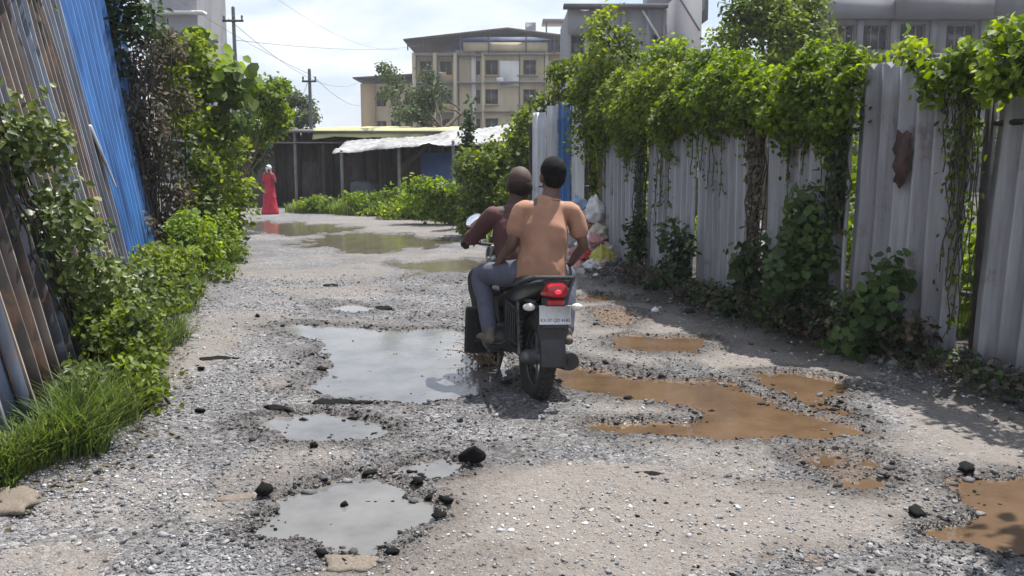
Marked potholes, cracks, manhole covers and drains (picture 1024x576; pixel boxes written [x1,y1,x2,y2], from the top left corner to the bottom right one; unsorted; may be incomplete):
pothole [386,452,470,482]
pothole [223,405,415,447]
pothole [319,301,381,314]
pothole [231,460,456,567]
pothole [768,438,918,497]
pothole [273,231,463,255]
pothole [601,330,718,355]
pothole [261,319,520,408]
pothole [903,467,1024,562]
pothole [242,220,371,237]
pothole [538,361,879,443]
